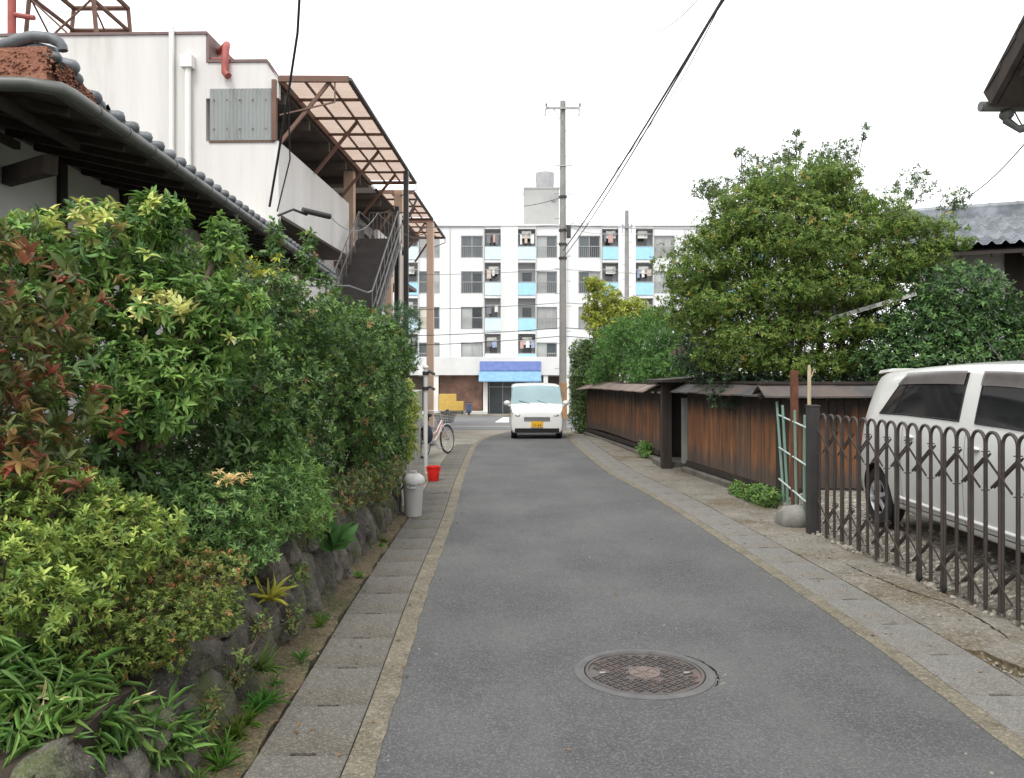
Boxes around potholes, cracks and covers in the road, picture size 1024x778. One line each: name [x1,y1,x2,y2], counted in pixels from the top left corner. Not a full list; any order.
crack [827,557,1009,639]
manhole cover [575,649,716,700]
